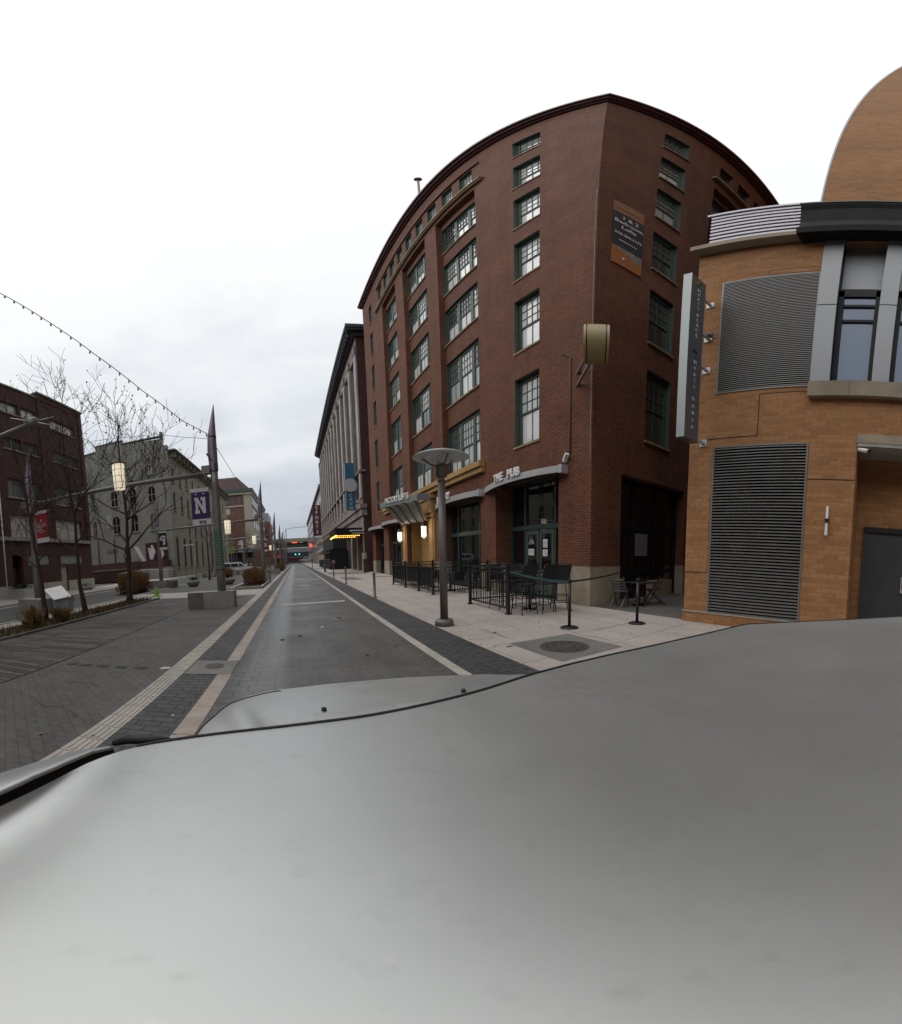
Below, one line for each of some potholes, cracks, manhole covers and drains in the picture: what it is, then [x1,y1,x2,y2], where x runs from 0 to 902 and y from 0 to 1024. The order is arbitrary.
manhole cover [540,641,589,653]
